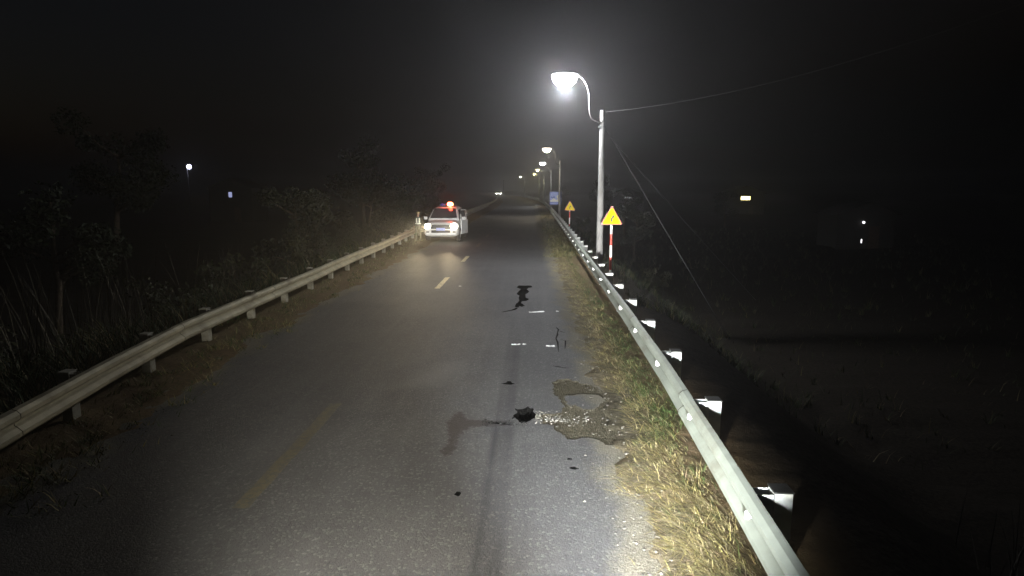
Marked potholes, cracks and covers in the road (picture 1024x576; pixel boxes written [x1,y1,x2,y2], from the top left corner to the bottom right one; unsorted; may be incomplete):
crack [555,327,566,368]
pothole [512,406,536,423]
pothole [540,379,617,445]
pothole [515,286,532,307]
